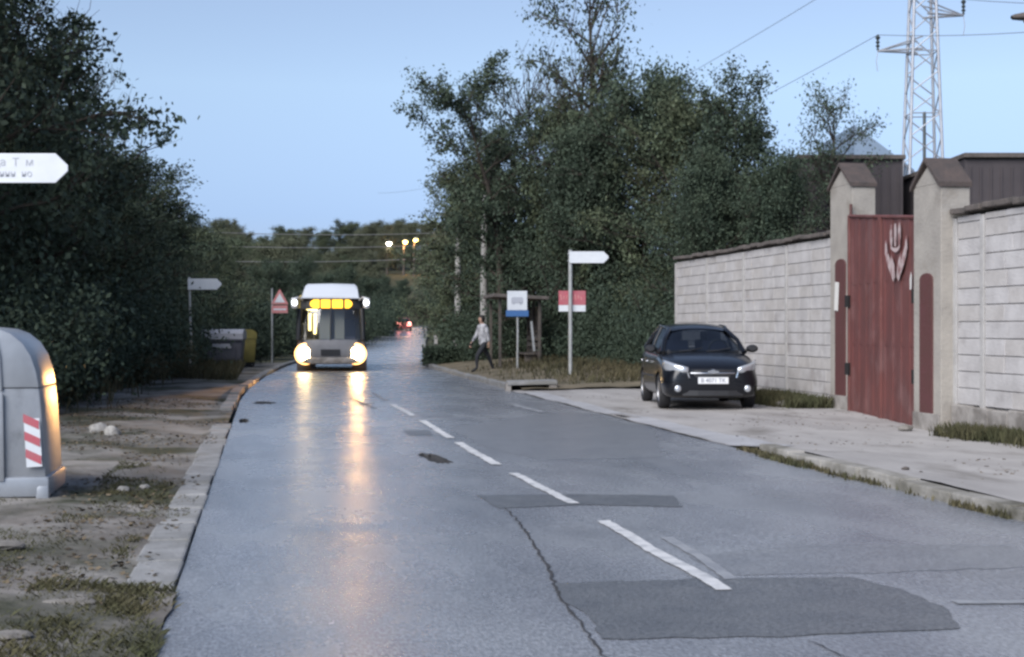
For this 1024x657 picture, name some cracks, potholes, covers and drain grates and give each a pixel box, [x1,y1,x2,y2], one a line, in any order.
crack [505,508,607,657]
pothole [418,453,454,464]
drain grate [505,379,558,391]
